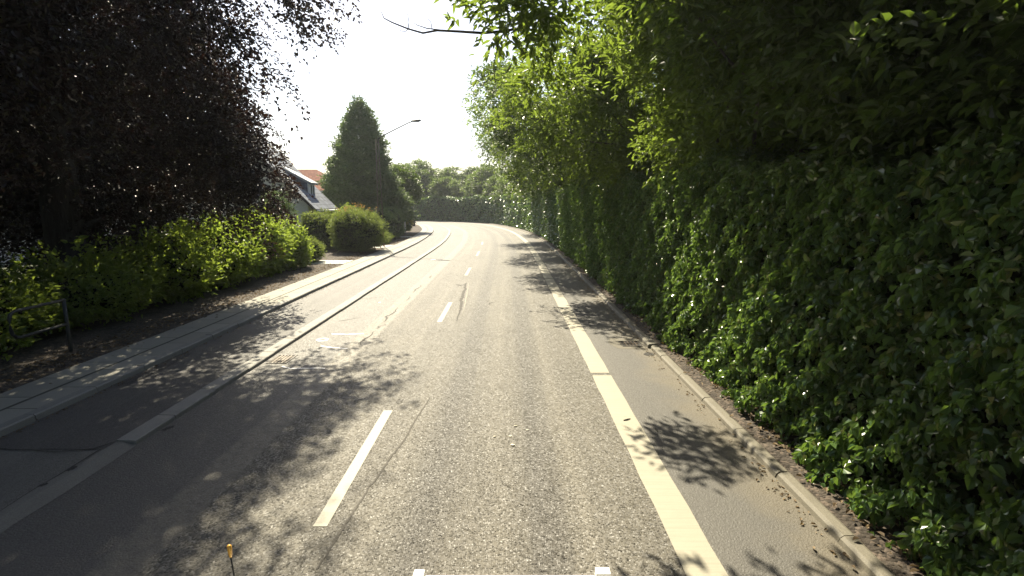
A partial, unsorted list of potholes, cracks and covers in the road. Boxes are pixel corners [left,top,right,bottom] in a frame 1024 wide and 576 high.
crack [456,283,469,321]
drain grate [266,355,297,364]
